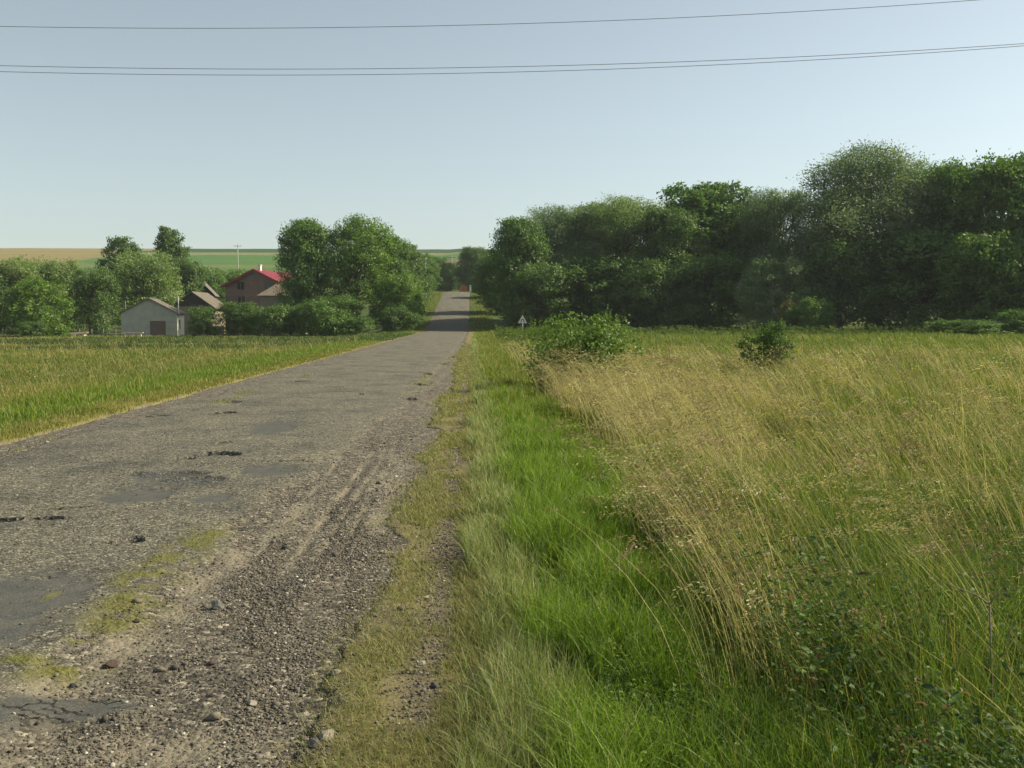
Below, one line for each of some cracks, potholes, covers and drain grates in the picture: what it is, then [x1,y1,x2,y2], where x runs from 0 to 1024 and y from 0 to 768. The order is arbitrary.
pothole [118,470,228,484]
pothole [172,451,242,460]
crack [2,698,136,723]
